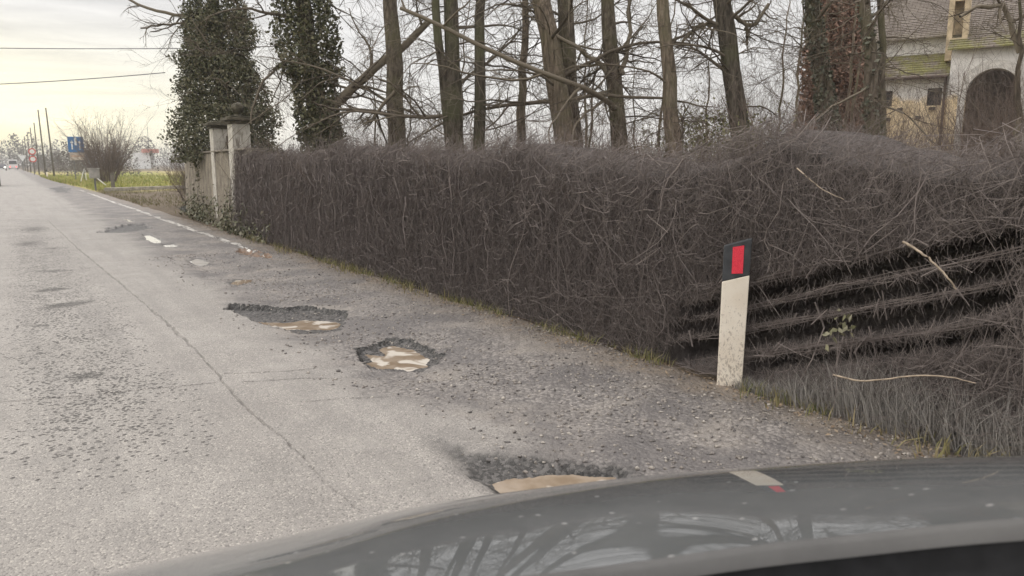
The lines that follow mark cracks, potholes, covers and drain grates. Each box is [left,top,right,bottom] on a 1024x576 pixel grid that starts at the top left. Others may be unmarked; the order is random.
pothole [223,303,348,334]
pothole [352,337,448,372]
pothole [225,279,254,287]
pothole [184,256,215,266]
pothole [235,248,273,260]
pothole [89,223,155,233]
pothole [416,430,644,496]
